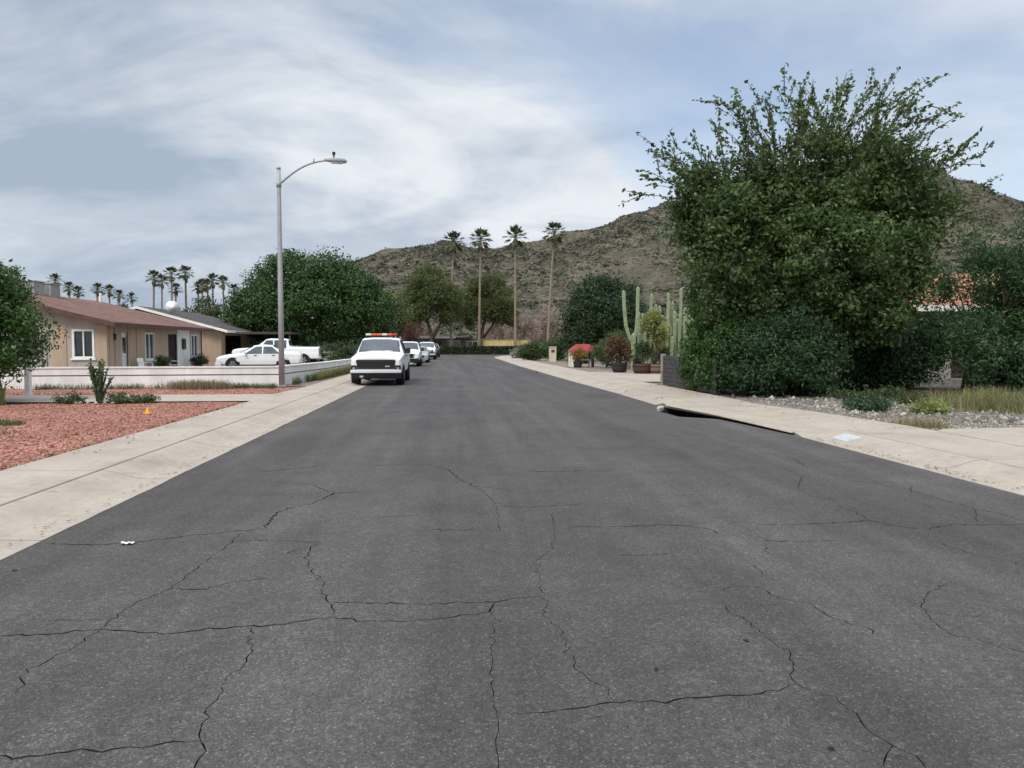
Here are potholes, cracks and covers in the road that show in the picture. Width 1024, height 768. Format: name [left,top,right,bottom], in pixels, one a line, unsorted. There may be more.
crack [375,464,578,530]
crack [723,459,1024,635]
crack [921,583,1021,652]
crack [0,491,926,768]
